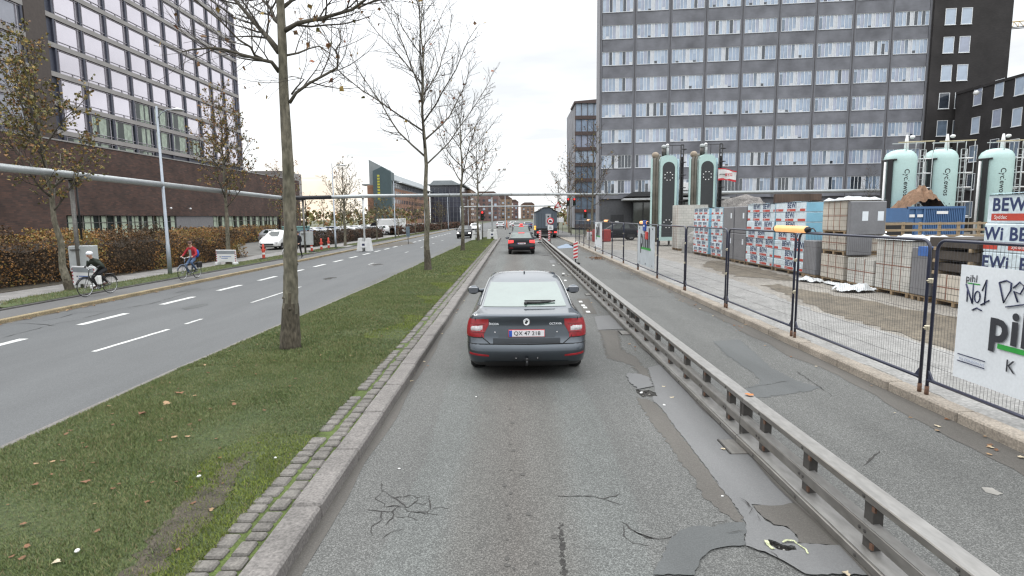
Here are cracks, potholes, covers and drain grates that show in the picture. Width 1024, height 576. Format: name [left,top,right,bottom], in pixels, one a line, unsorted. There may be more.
crack [623,523,674,545]
pothole [635,389,657,397]
pothole [768,540,795,551]
crack [366,483,450,540]
